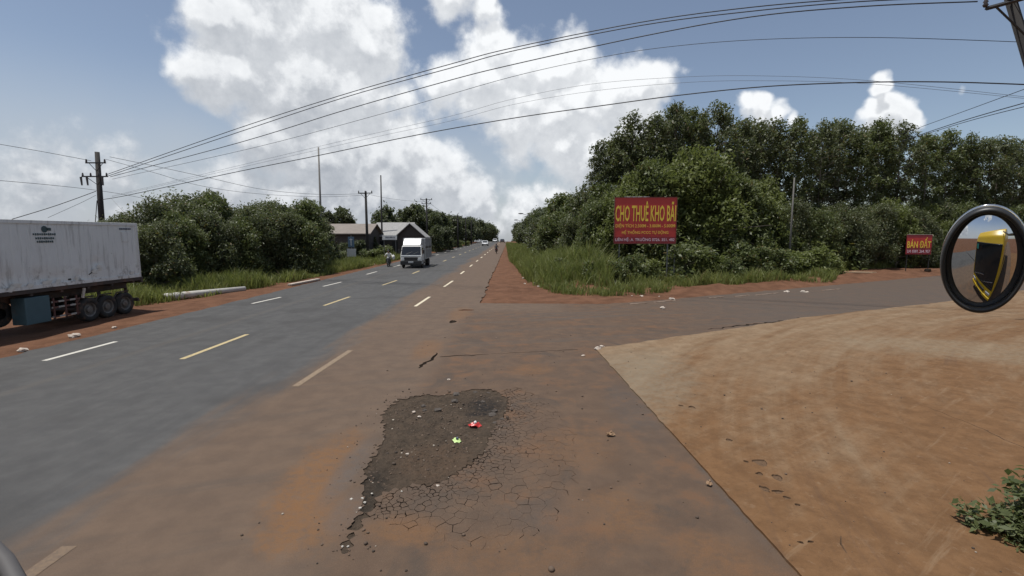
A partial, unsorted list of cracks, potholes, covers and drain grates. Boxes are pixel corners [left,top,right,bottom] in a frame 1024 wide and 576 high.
crack [370,388,579,551]
pothole [340,389,510,554]
crack [419,350,560,368]
crack [711,317,798,329]
